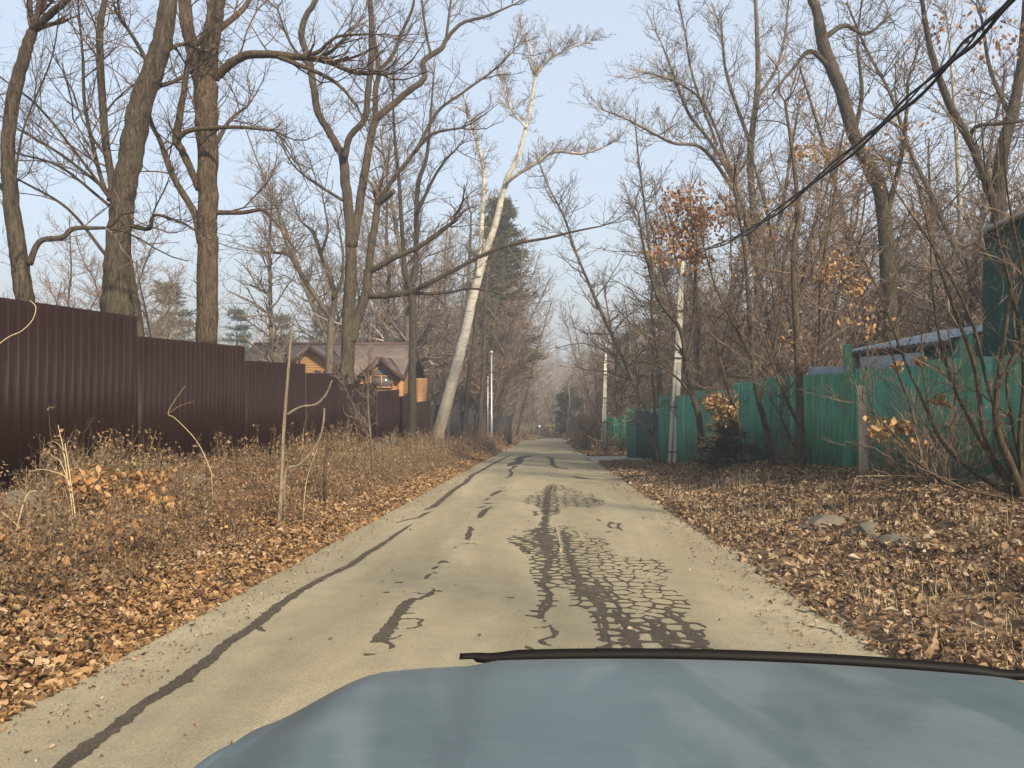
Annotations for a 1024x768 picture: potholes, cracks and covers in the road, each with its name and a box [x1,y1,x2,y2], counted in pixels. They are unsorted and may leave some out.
crack [364,443,713,655]
